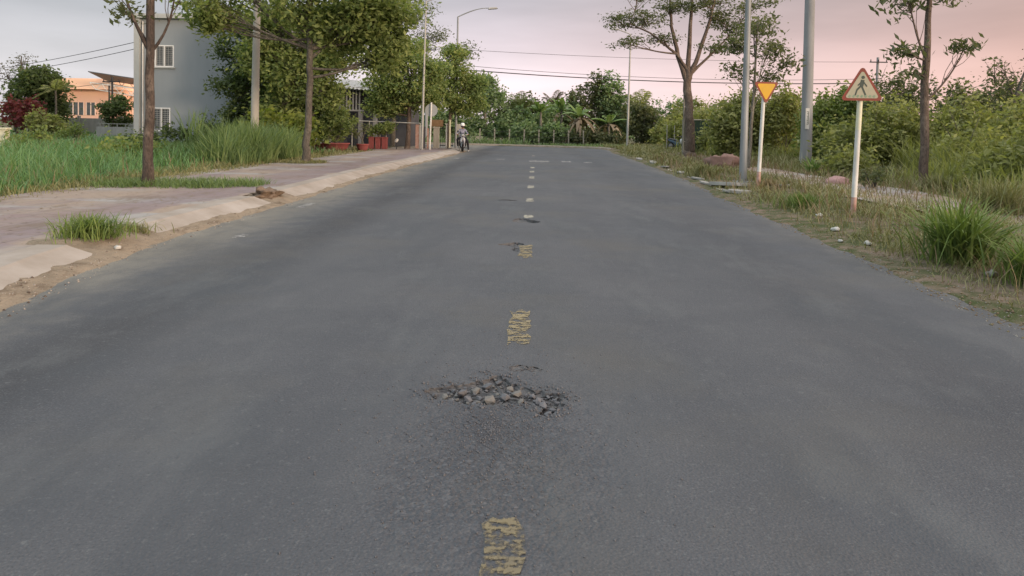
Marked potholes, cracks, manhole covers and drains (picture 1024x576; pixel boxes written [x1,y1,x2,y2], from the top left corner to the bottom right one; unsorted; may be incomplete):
pothole [499,242,525,252]
pothole [424,375,567,416]
